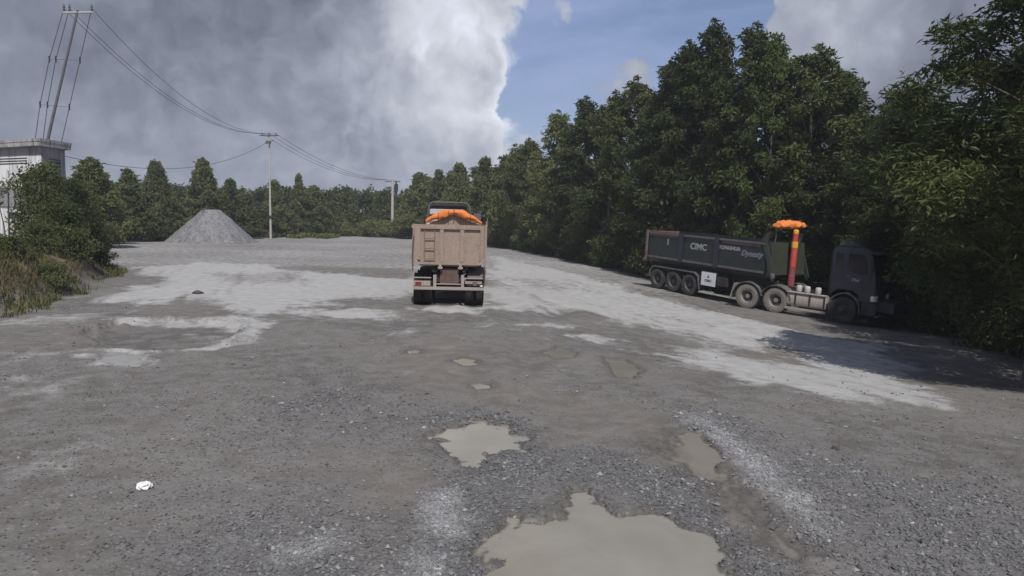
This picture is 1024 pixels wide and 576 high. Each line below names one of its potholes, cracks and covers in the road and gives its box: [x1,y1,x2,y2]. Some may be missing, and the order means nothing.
pothole [426,419,533,470]
pothole [453,358,478,366]
pothole [543,348,577,359]
pothole [470,490,735,576]
pothole [603,358,642,379]
pothole [644,431,823,562]
